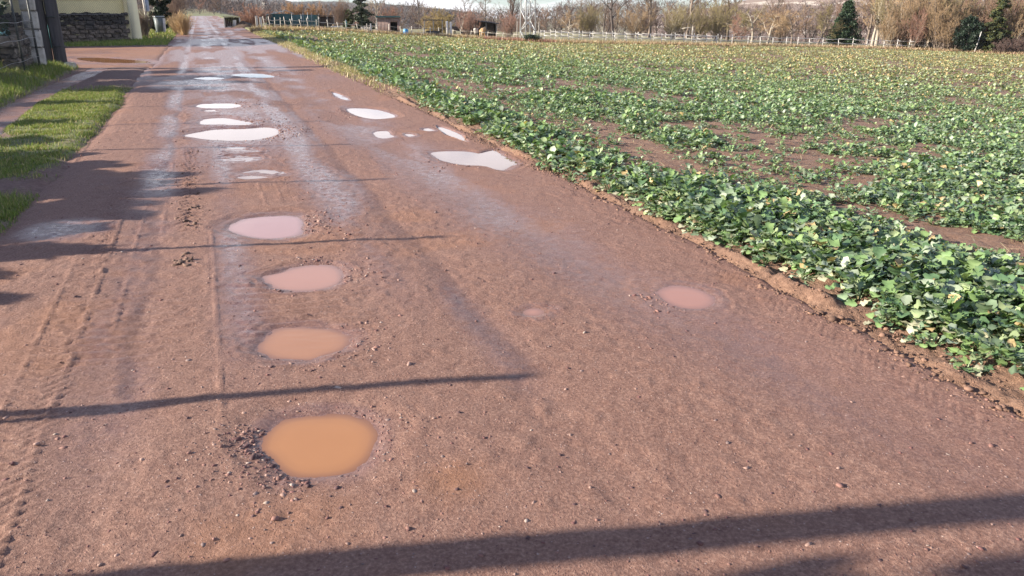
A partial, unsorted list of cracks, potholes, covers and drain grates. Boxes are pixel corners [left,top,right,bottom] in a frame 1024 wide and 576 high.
pothole [155,122,304,143]
pothole [413,146,538,174]
pothole [196,205,330,245]
pothole [228,314,383,371]
pothole [507,302,559,322]
pothole [182,114,273,127]
pothole [236,255,367,298]
pothole [633,275,744,321]
pothole [215,166,305,181]
pothole [180,100,258,110]
pothole [335,105,408,121]
